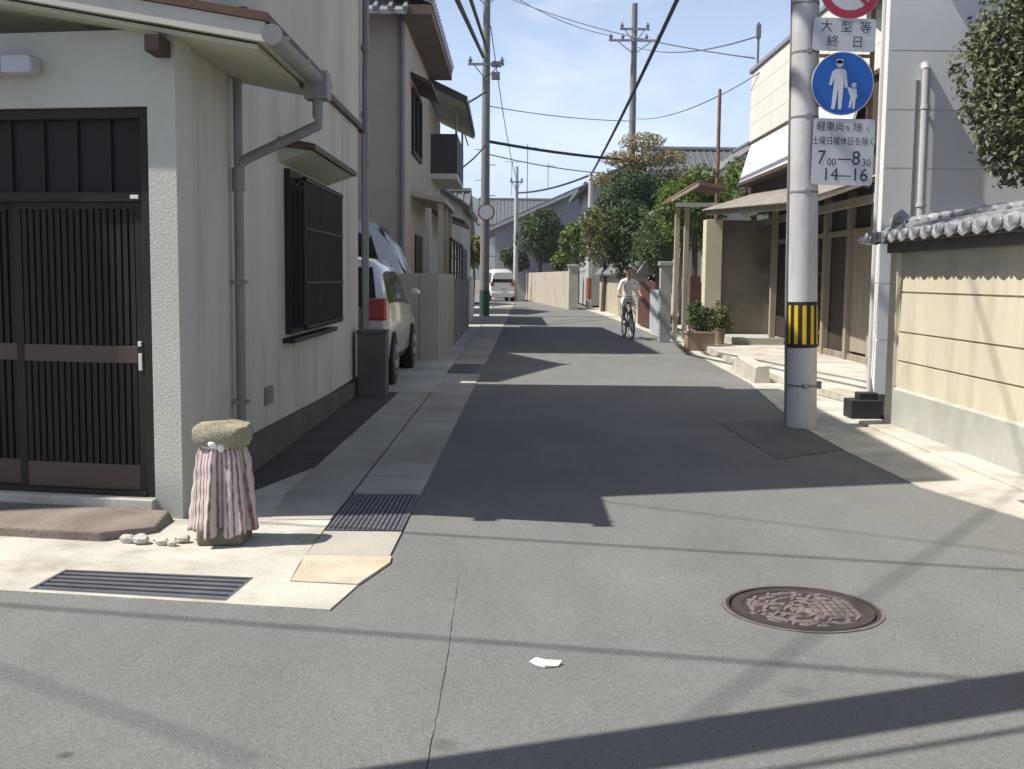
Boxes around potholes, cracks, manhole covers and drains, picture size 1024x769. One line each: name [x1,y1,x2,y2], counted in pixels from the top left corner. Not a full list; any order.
drain grate [326,494,419,533]
drain grate [30,569,254,601]
manhole cover [722,585,886,634]
crack [426,577,459,769]
drain grate [449,364,482,374]
